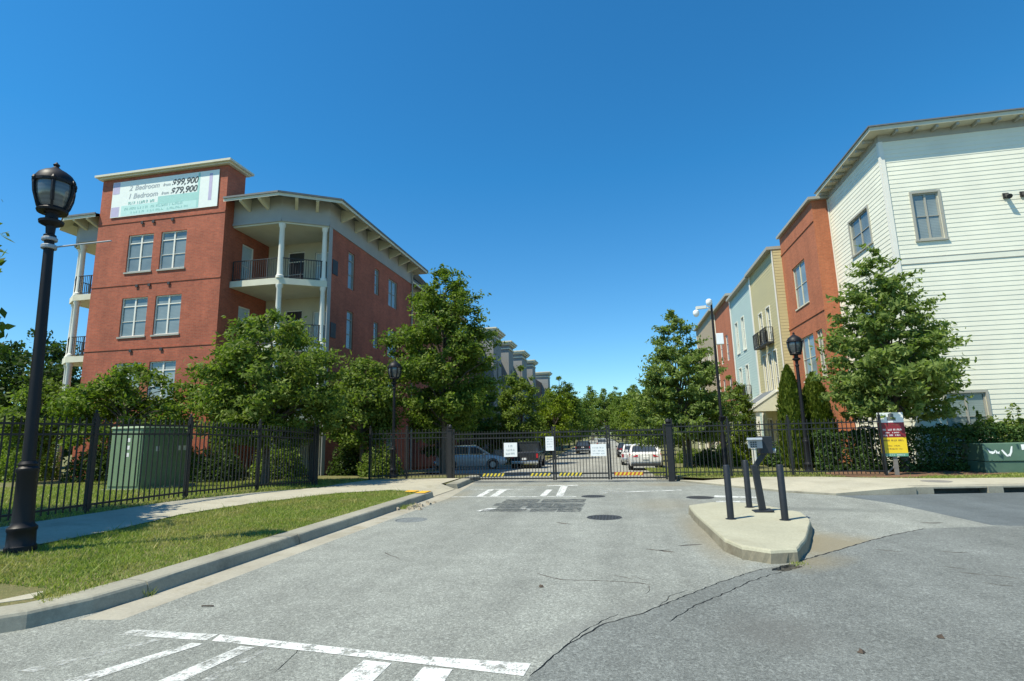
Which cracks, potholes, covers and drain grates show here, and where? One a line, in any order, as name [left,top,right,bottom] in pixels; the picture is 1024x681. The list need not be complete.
crack [530,522,940,676]
drain grate [907,483,1024,494]
